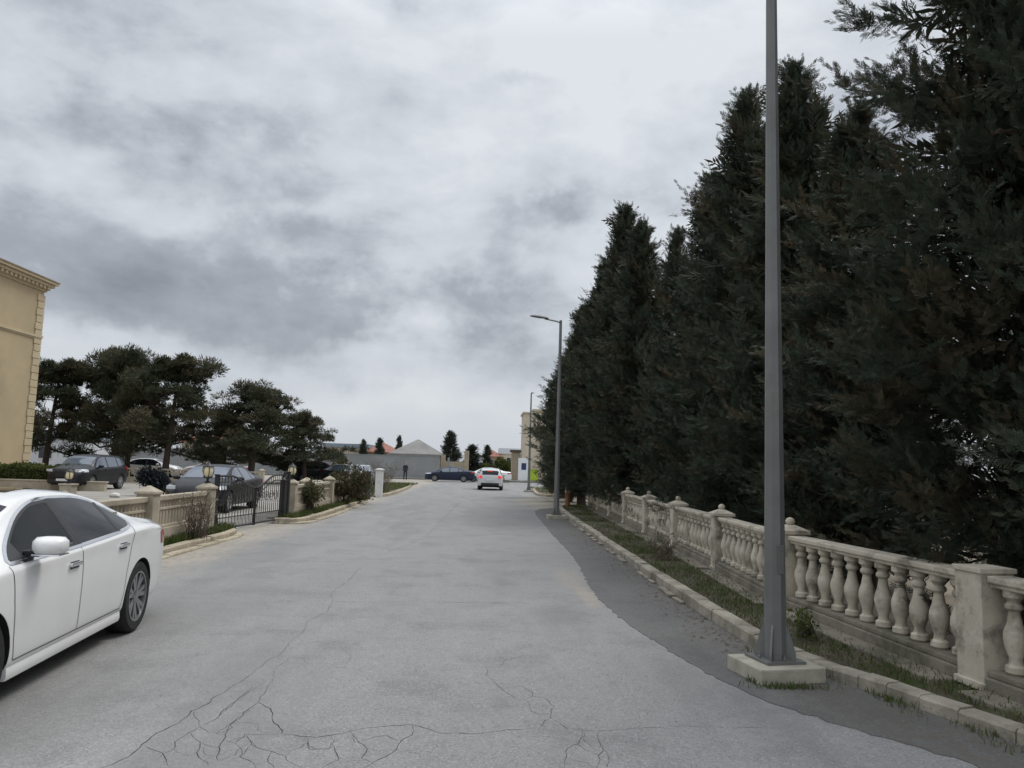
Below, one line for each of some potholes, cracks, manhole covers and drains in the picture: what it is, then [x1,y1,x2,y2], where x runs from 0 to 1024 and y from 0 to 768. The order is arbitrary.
crack [101,592,597,768]
crack [486,657,762,768]
